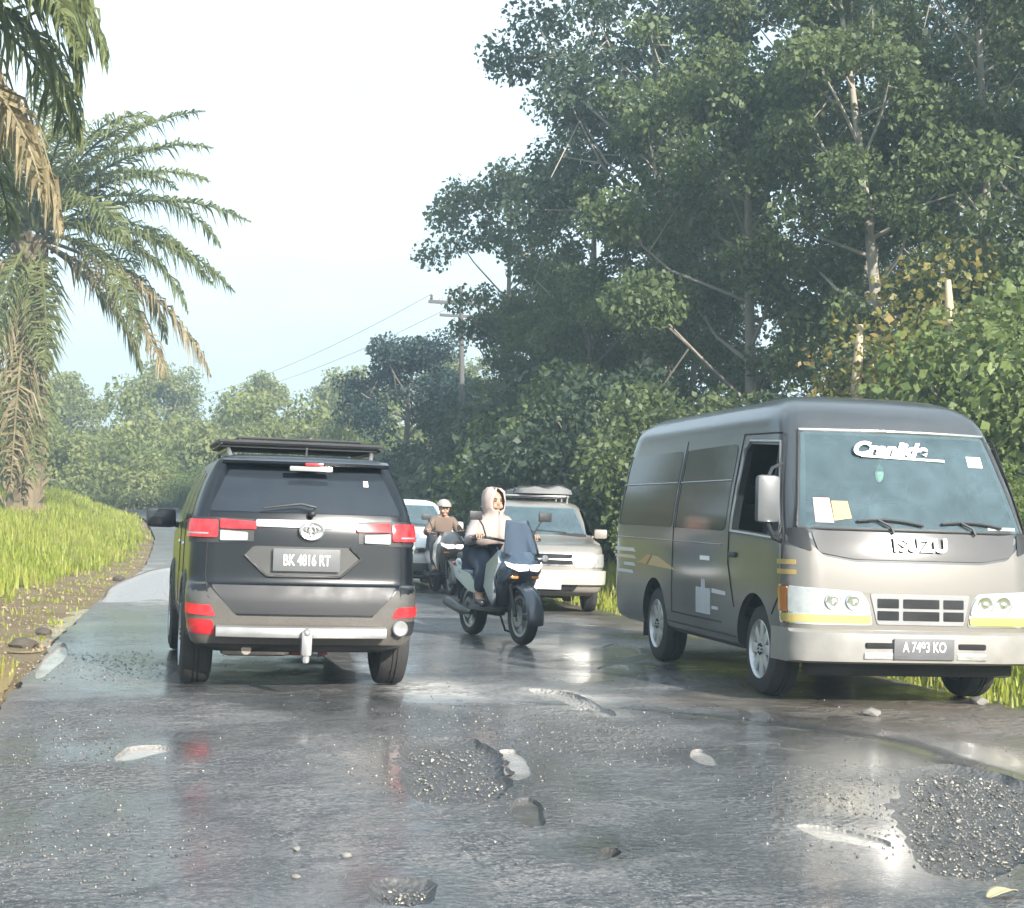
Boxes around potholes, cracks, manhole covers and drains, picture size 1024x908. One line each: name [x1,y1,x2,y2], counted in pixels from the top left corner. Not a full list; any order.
pothole [529,688,617,717]
pothole [884,764,1024,881]
pothole [510,798,546,826]
pothole [391,736,515,805]
pothole [368,877,438,907]
